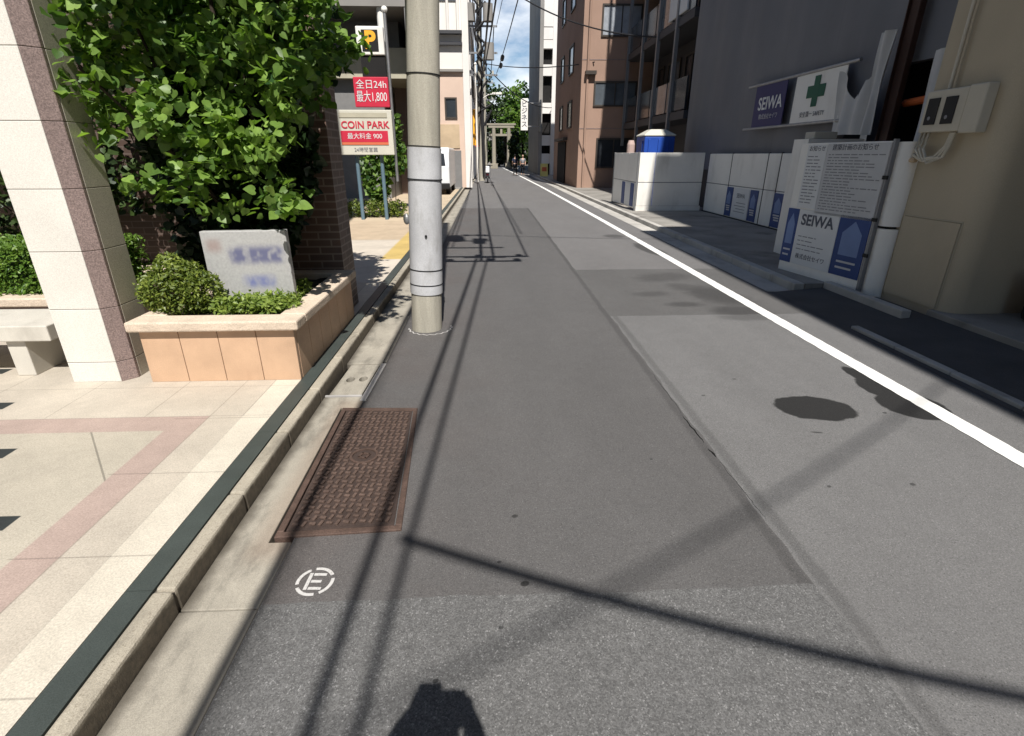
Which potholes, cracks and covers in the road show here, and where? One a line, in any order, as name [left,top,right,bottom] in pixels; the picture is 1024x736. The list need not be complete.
manhole cover [274,408,418,543]
